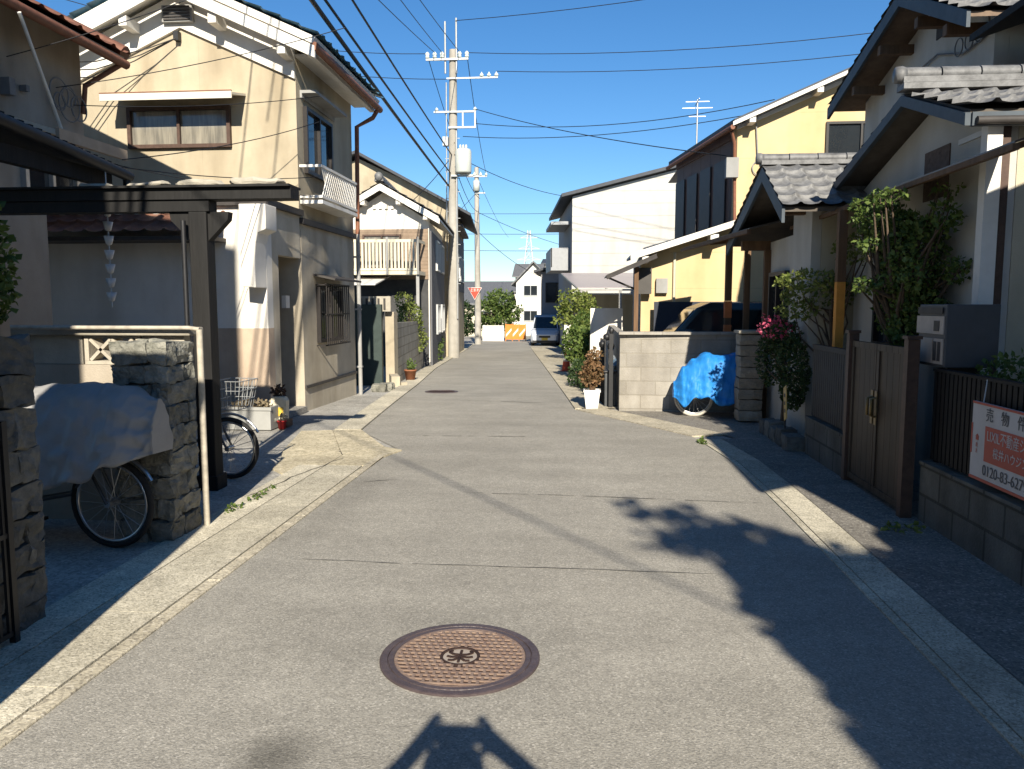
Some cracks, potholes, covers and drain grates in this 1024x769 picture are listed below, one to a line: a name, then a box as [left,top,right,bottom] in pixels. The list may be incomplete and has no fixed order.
manhole cover [379,624,540,697]
